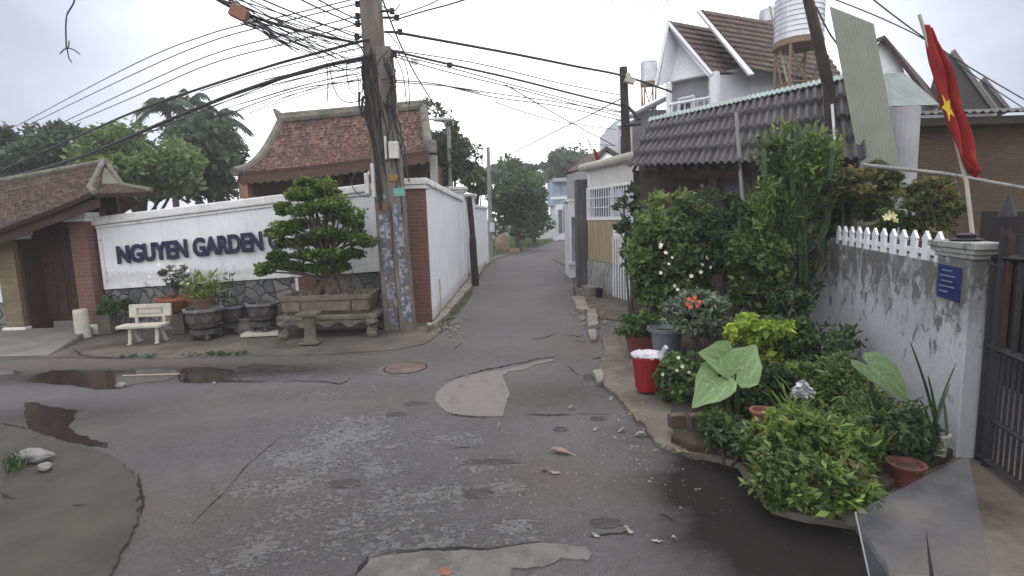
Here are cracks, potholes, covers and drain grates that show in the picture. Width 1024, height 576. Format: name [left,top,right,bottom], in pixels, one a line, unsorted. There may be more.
crack [447,334,600,382]
manhole cover [377,361,434,376]
pothole [589,517,625,528]
crack [198,435,282,517]
